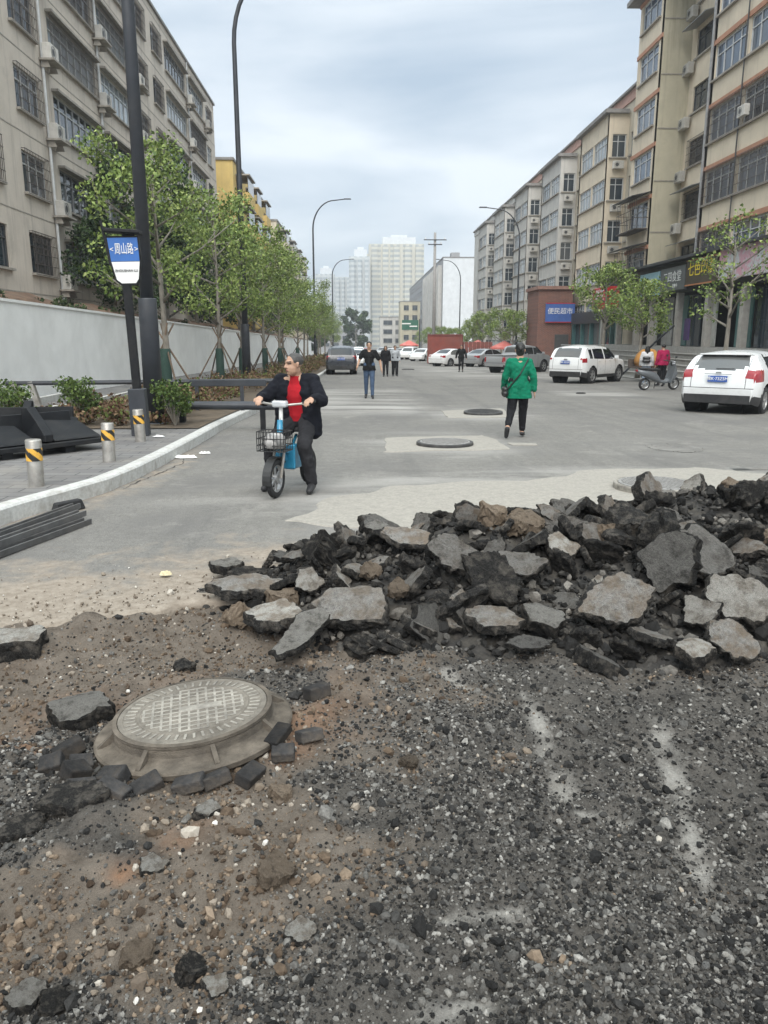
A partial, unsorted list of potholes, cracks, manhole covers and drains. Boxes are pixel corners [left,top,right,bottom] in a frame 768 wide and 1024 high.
manhole cover [416,438,473,448]
manhole cover [613,476,685,493]
manhole cover [93,677,292,781]
